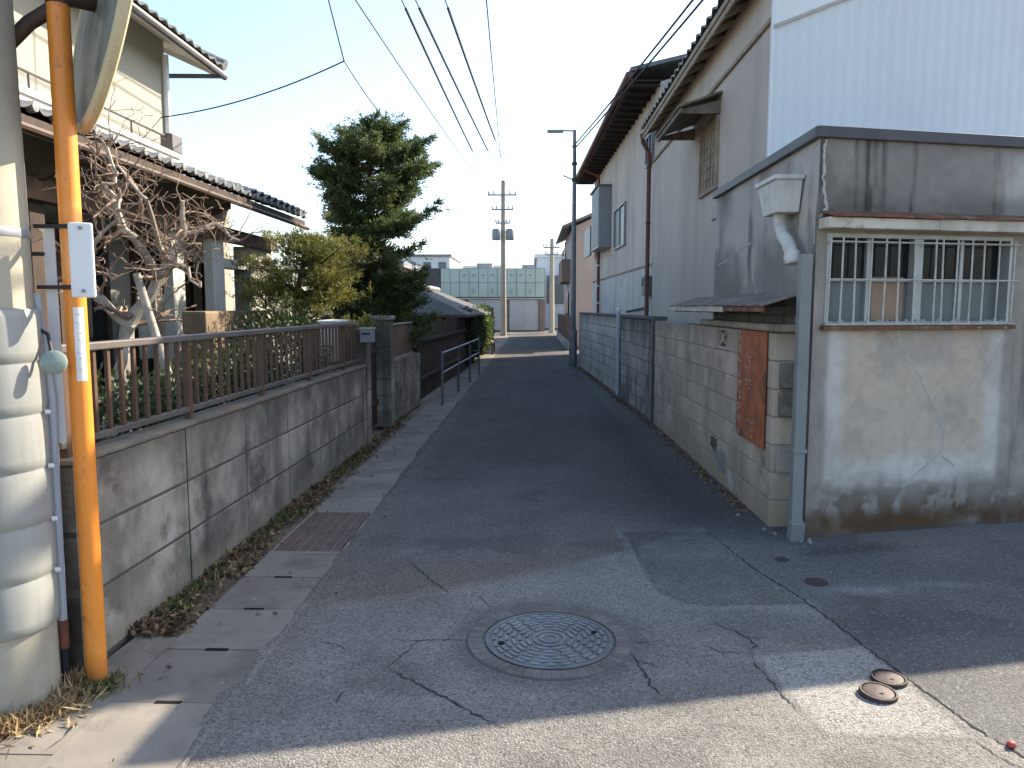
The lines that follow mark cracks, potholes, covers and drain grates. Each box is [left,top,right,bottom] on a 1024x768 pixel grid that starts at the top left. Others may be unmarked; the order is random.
drain grate [271,511,373,553]
utility cover [804,578,829,587]
utility cover [858,681,899,704]
crack [702,623,799,713]
crack [631,640,662,695]
utility cover [870,669,908,689]
crack [383,639,505,728]
manhole cover [466,606,633,681]
